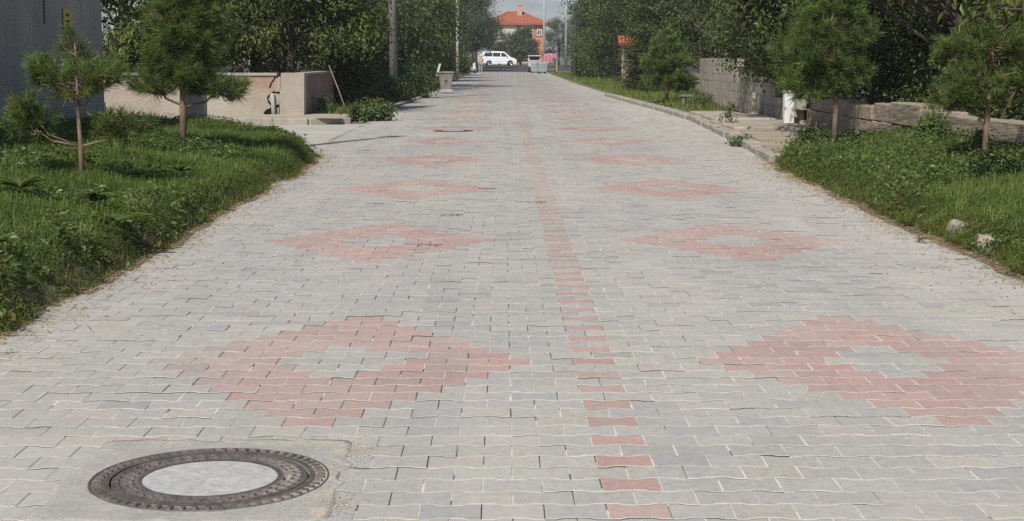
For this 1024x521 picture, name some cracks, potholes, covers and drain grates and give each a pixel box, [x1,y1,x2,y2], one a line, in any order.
manhole cover [24,439,354,521]
